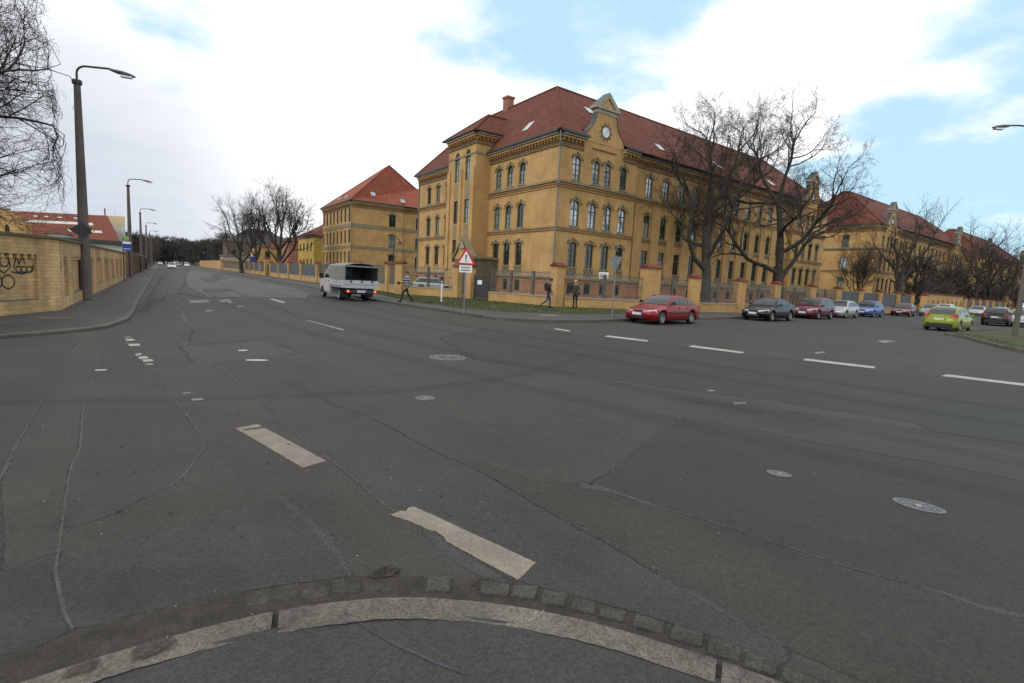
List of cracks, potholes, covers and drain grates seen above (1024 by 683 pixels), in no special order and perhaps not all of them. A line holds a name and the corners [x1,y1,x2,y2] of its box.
manhole cover [892,497,947,514]
